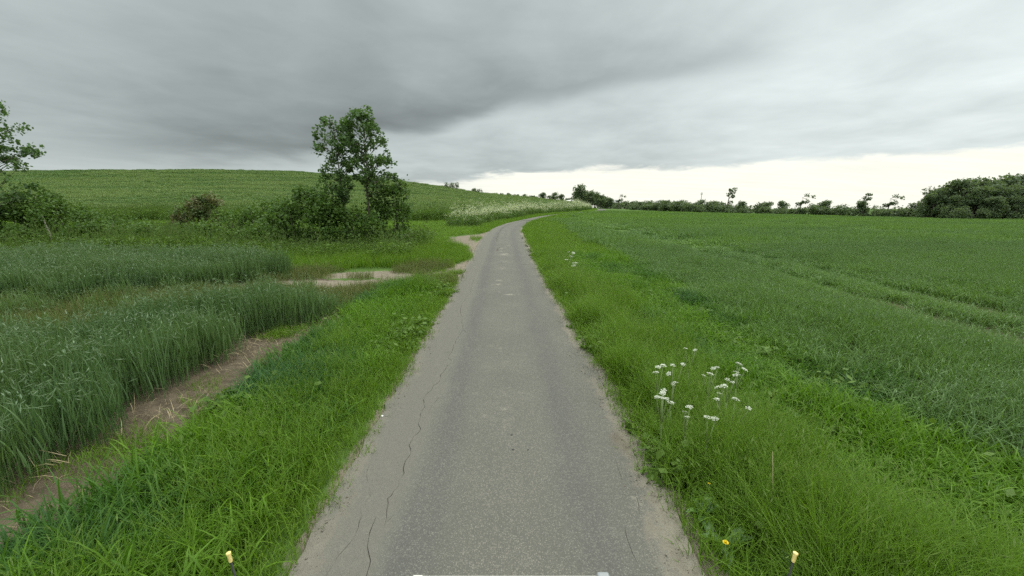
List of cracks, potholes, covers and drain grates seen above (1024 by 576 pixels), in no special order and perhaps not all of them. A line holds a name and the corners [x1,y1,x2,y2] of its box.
crack [326,269,474,576]
